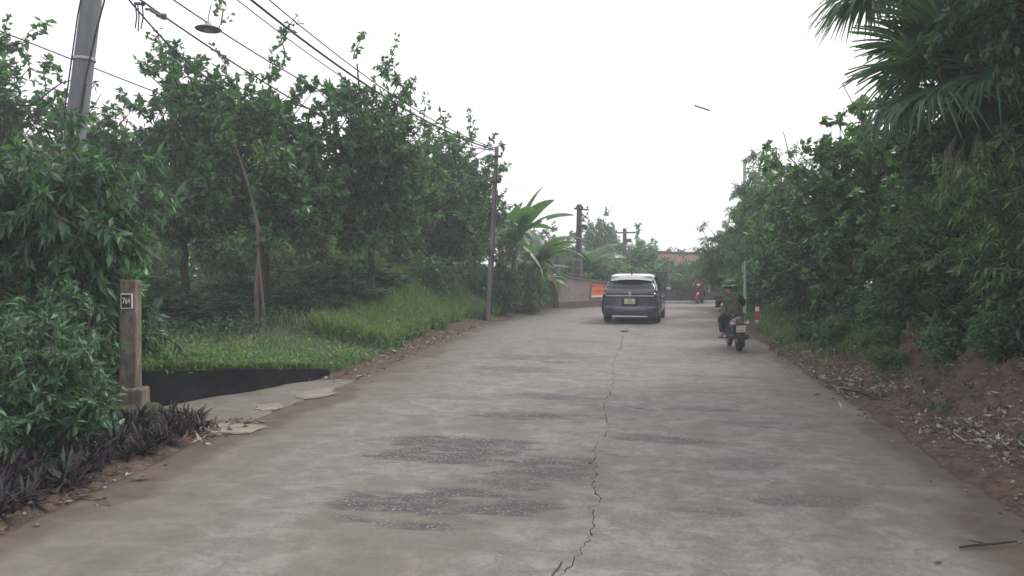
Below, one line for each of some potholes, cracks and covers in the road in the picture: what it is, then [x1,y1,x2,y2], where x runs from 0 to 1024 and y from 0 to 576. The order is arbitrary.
crack [551,335,623,576]
